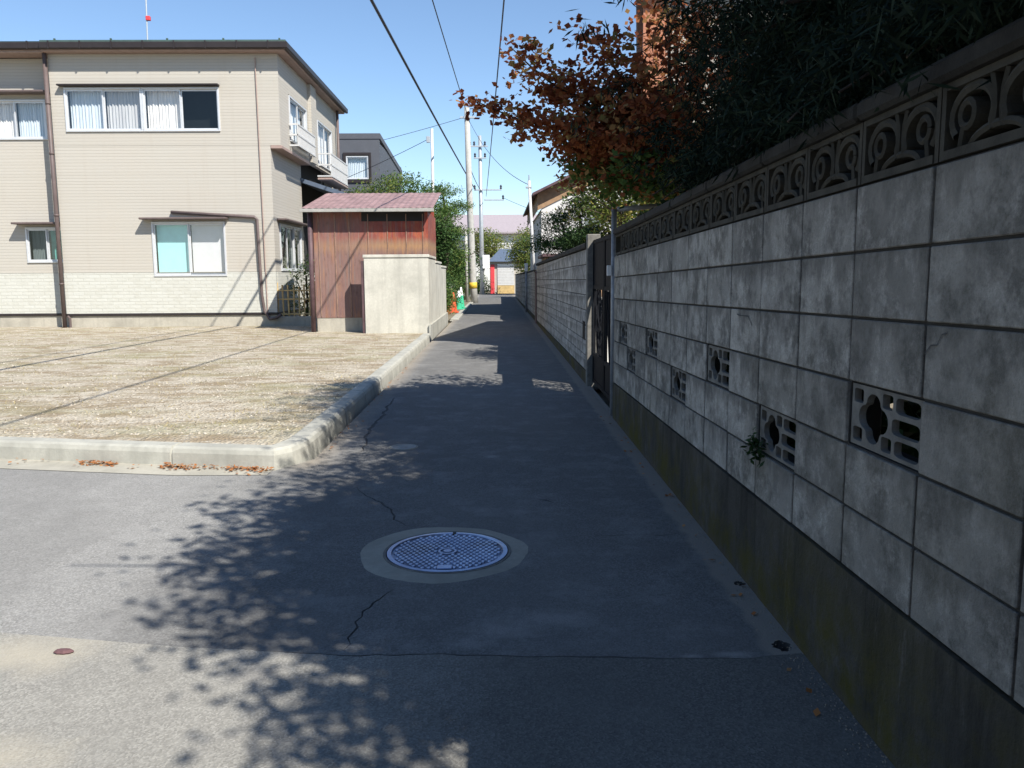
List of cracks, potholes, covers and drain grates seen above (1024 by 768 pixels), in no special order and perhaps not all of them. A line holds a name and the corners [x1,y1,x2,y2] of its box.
crack [360,398,394,452]
crack [343,589,394,651]
manhole cover [360,527,528,584]
crack [358,489,406,526]
